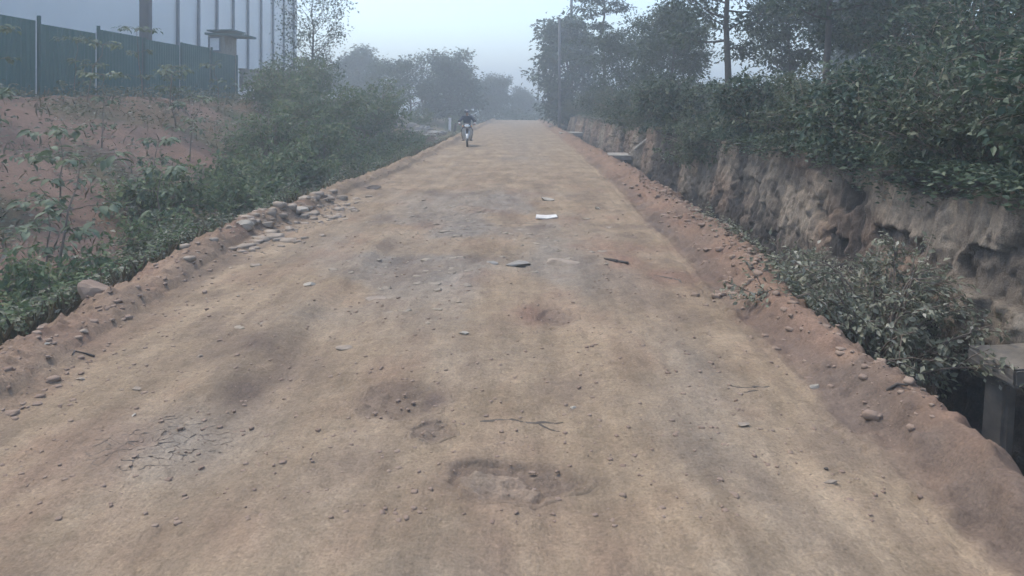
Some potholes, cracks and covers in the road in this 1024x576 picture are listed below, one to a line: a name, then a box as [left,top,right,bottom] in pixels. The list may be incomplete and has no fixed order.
pothole [435,456,599,510]
crack [85,415,234,471]
pothole [351,379,455,424]
pothole [534,306,581,329]
pothole [405,418,460,444]
